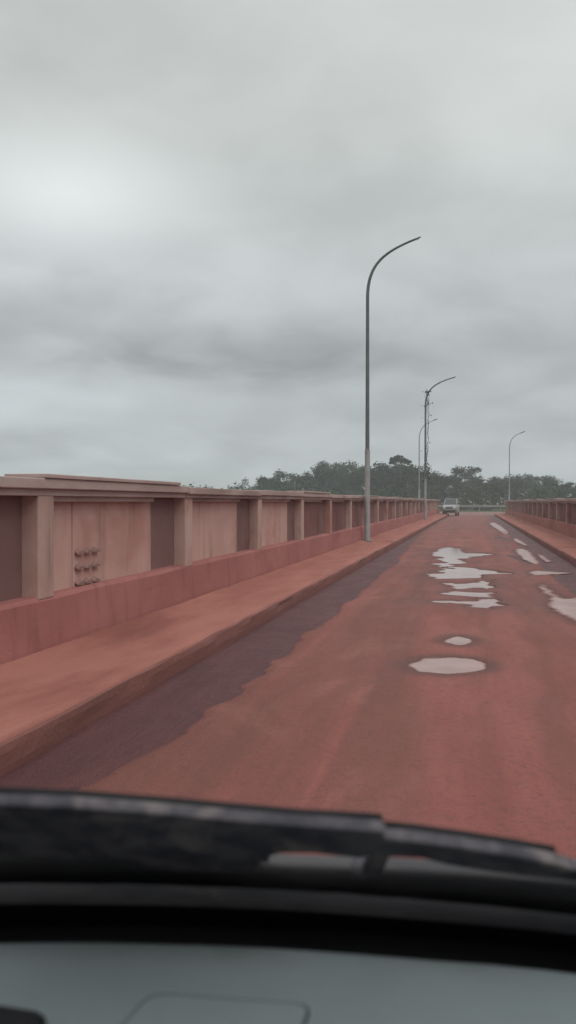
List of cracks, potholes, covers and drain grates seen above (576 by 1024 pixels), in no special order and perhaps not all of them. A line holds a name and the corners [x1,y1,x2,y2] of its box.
pothole [443,635,473,645]
pothole [430,547,494,569]
pothole [442,579,497,589]
pothole [407,656,487,674]
pothole [425,566,515,579]
pothole [430,598,508,609]
